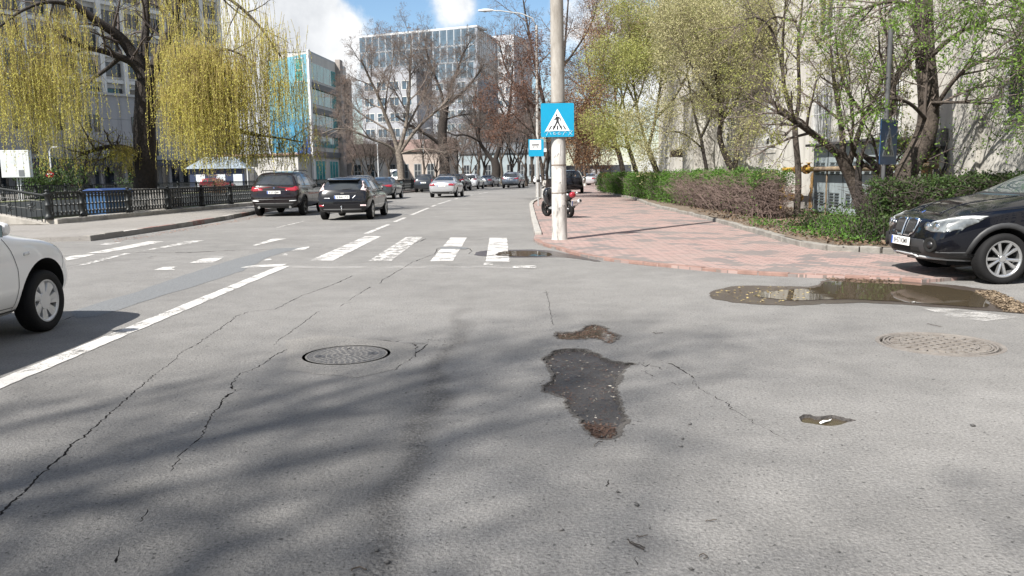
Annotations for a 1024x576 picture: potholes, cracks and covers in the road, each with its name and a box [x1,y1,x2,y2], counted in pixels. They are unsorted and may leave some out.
crack [0,275,354,515]
crack [626,363,787,440]
pothole [799,414,856,422]
pothole [553,324,622,343]
pothole [541,348,636,440]
manhole cover [875,332,1008,357]
manhole cover [302,345,390,365]
crack [114,312,317,563]
